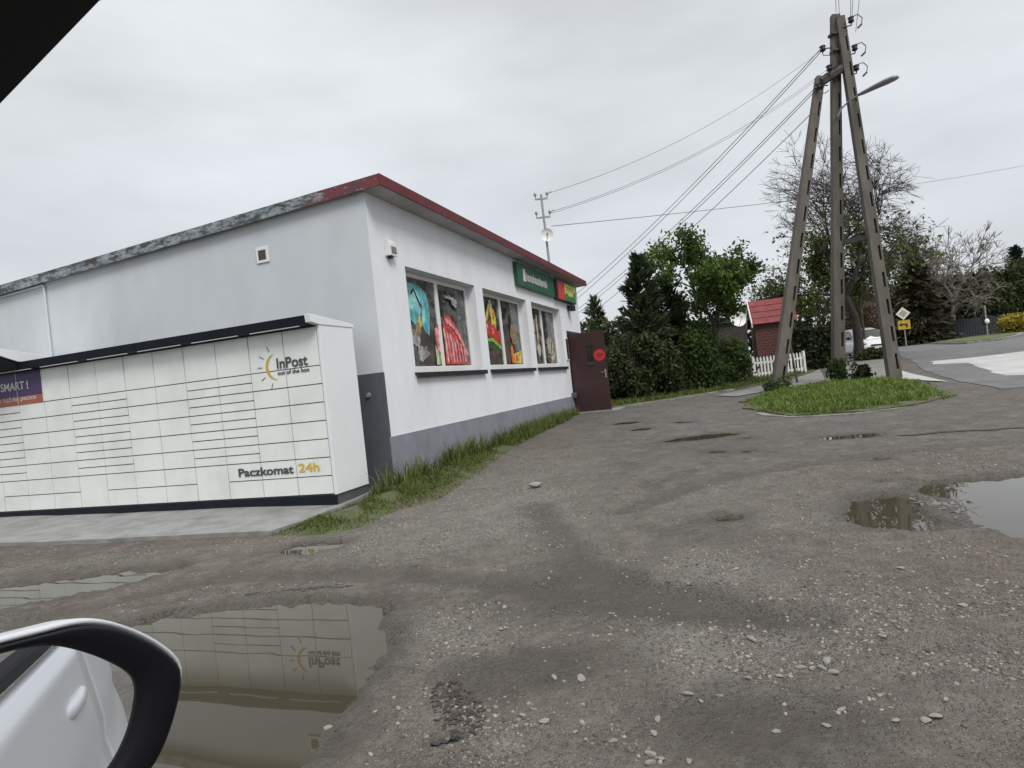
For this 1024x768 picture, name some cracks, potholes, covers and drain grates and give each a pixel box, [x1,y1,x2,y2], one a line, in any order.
pothole [892,469,1024,545]
crack [897,427,1024,436]
pothole [800,485,976,540]
pothole [798,430,904,443]
pothole [844,474,924,487]
pothole [0,557,217,616]
pothole [87,587,441,768]
pothole [643,431,758,446]
